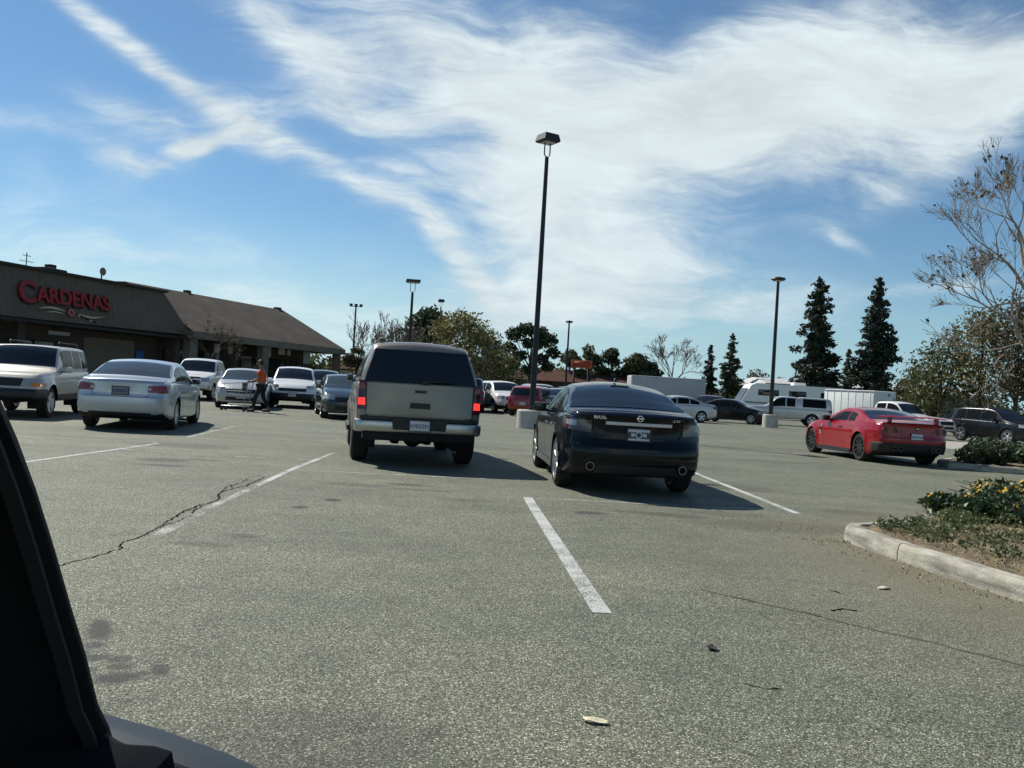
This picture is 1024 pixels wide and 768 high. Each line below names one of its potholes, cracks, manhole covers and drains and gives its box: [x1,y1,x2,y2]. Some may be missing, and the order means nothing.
crack [59,475,266,566]
crack [701,589,1024,666]
